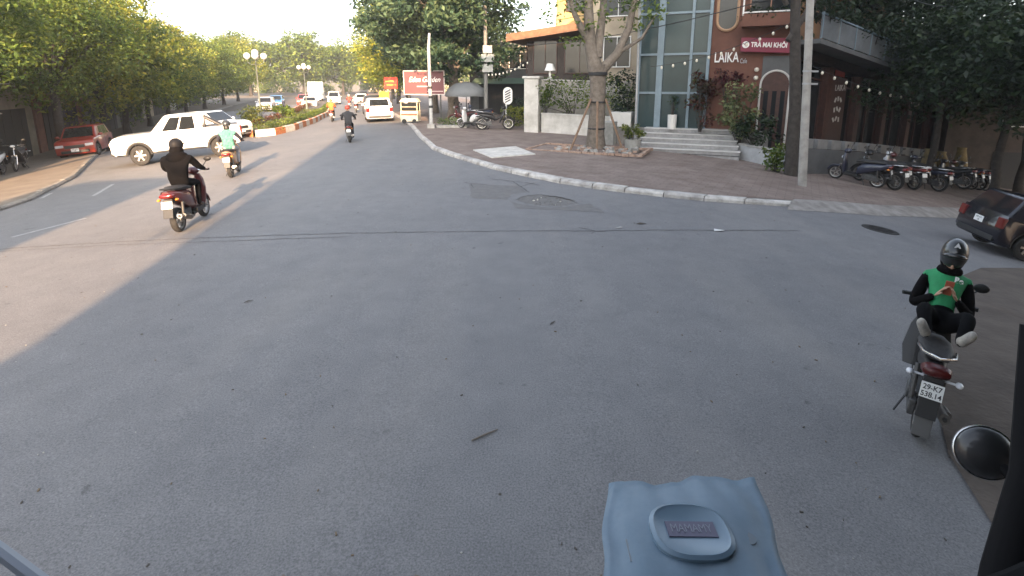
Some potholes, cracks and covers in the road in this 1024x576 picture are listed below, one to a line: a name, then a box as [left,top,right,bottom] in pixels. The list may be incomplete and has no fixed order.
manhole cover [861,224,899,235]
